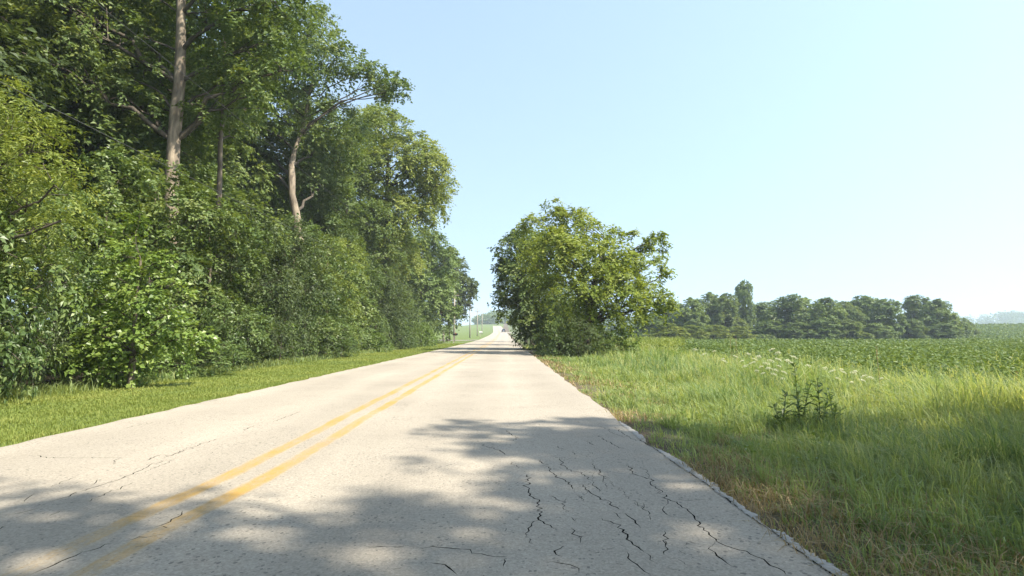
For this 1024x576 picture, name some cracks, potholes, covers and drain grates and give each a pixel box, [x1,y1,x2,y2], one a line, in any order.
crack [486,430,836,576]
crack [380,546,506,573]
crack [57,441,213,500]
